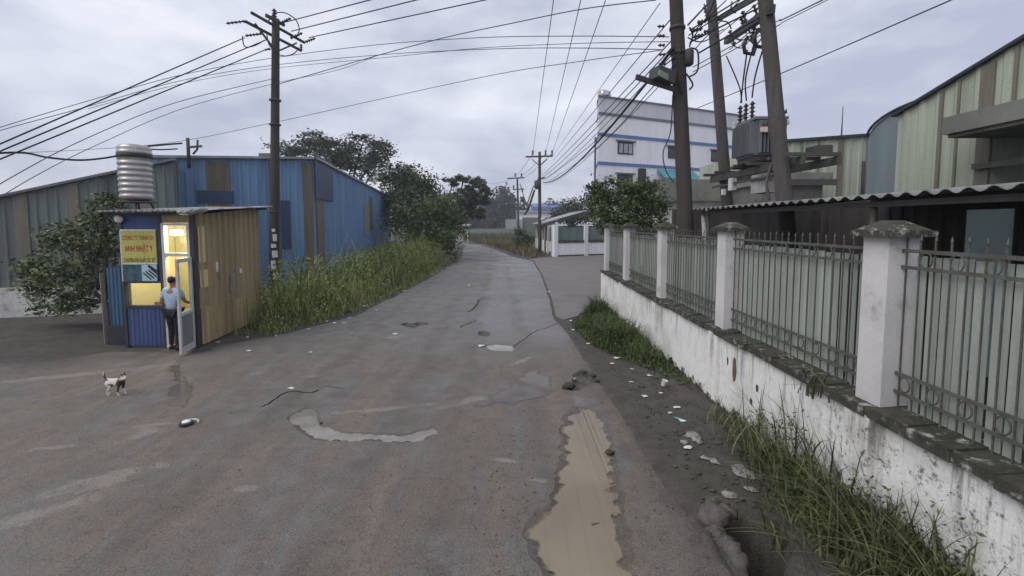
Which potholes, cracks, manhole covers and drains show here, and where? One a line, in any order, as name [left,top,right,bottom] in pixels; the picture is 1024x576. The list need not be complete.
crack [258,386,344,408]
pothole [562,370,594,391]
pothole [522,406,639,576]
